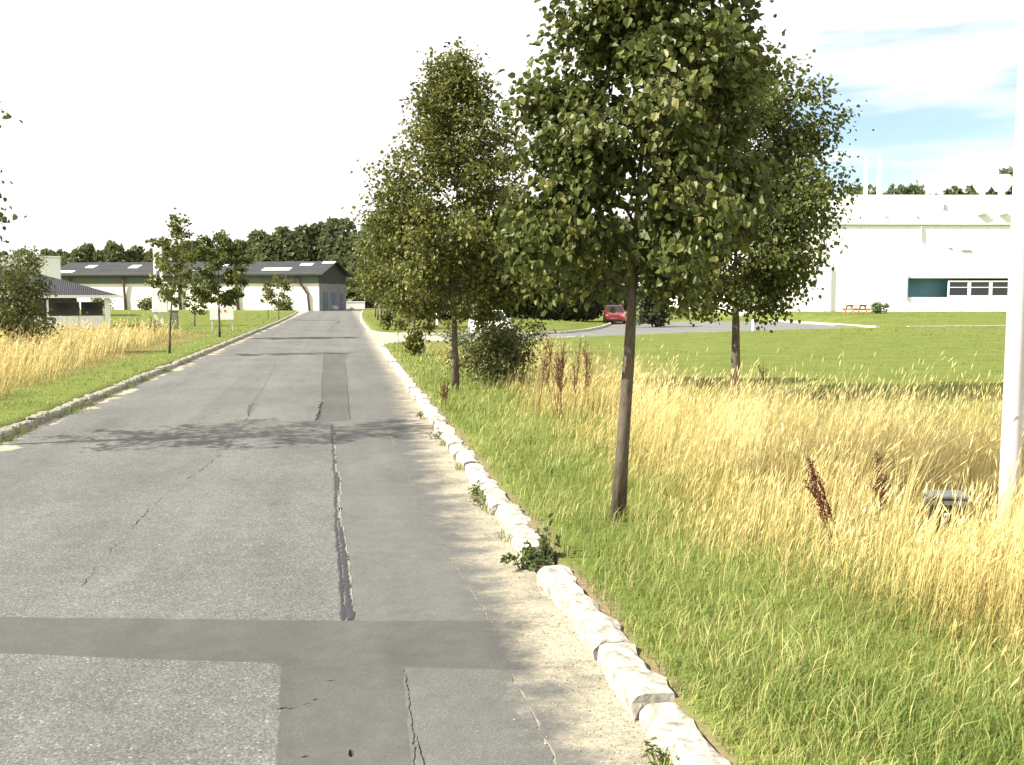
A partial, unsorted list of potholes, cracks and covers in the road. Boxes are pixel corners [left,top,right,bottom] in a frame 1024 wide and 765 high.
crack [81,363,277,586]
crack [389,432,557,765]
